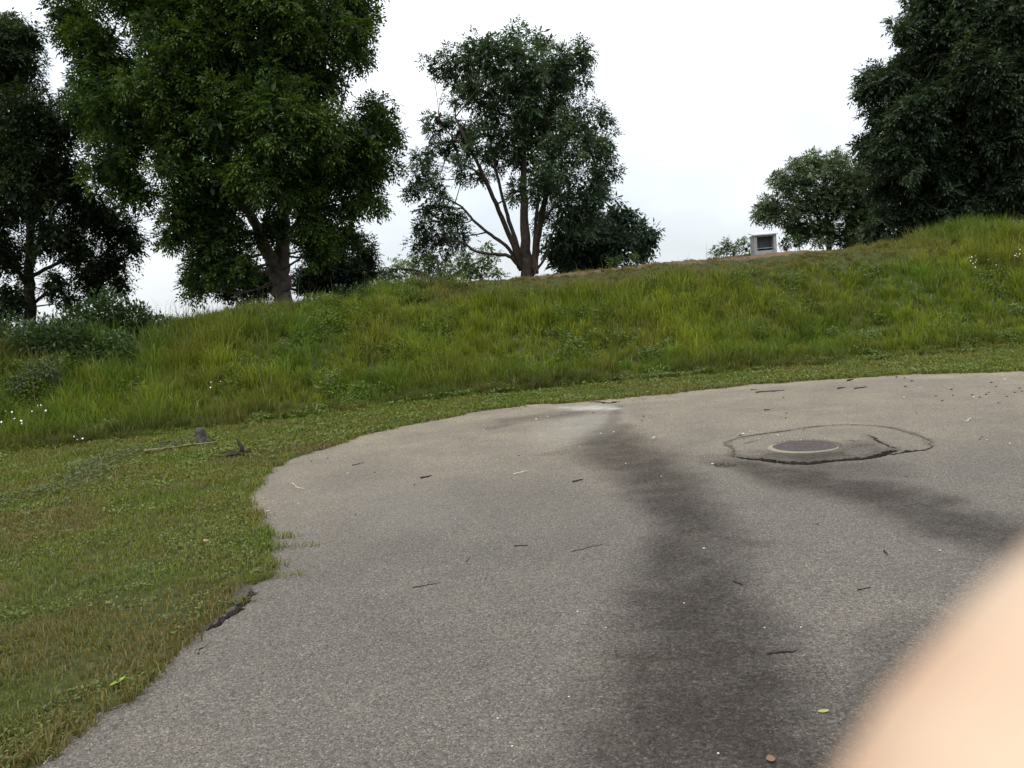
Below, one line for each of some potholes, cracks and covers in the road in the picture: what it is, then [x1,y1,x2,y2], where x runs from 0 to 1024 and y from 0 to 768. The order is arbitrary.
manhole cover [768,440,839,453]
